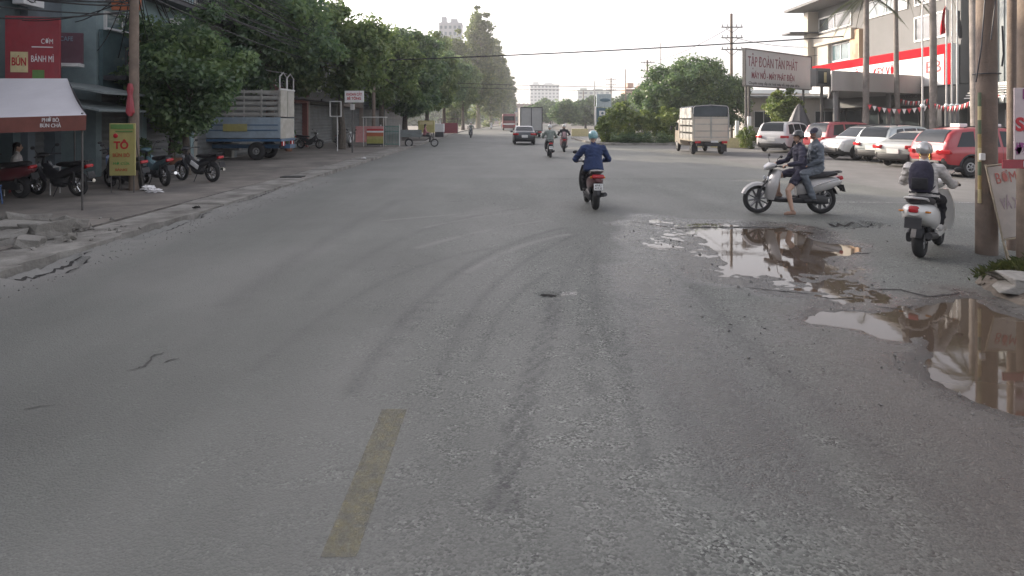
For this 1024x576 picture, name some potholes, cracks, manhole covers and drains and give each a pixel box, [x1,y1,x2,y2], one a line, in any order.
pothole [826,221,890,229]
pothole [692,228,832,276]
pothole [798,304,923,343]
pothole [533,290,565,300]
pothole [913,296,1024,418]
crack [0,182,260,281]
